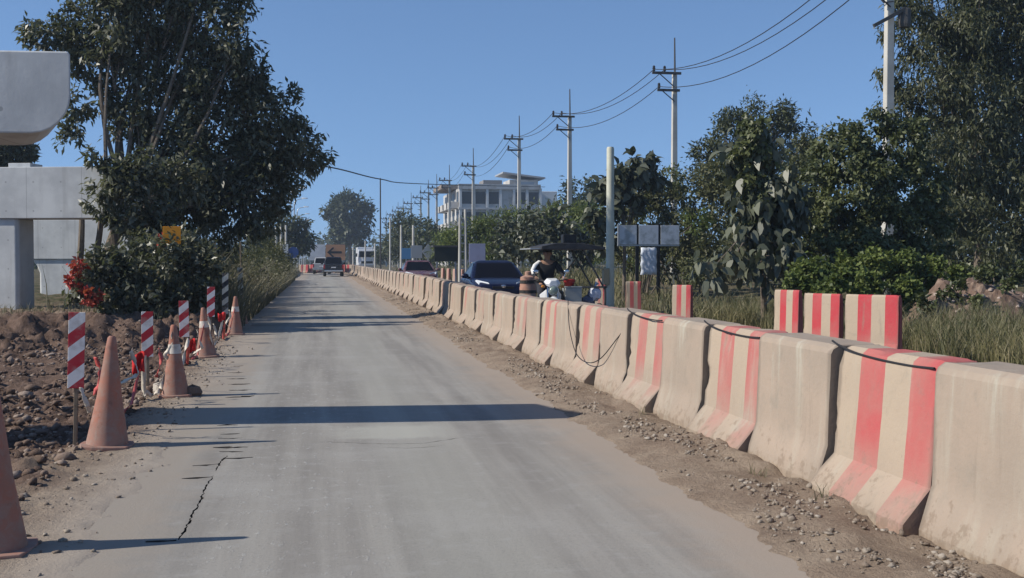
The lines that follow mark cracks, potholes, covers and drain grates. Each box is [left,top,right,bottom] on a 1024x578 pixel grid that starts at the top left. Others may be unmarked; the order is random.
crack [146,372,252,542]
